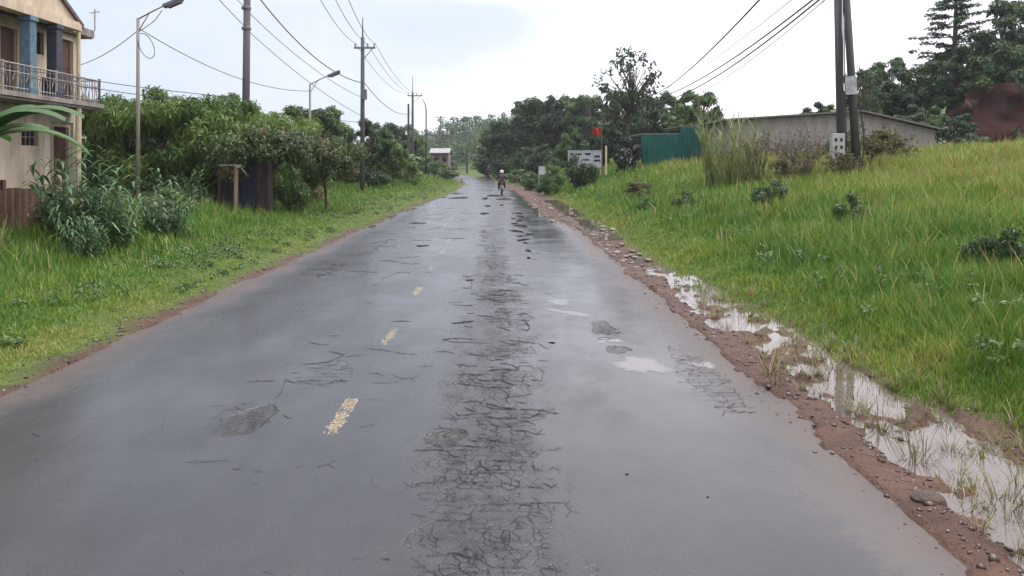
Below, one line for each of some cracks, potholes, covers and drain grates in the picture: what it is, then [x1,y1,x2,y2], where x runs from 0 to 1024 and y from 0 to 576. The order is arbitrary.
pothole [605,346,632,354]
crack [212,335,412,436]
pothole [220,404,279,435]
pothole [591,320,616,335]
crack [316,208,577,576]
